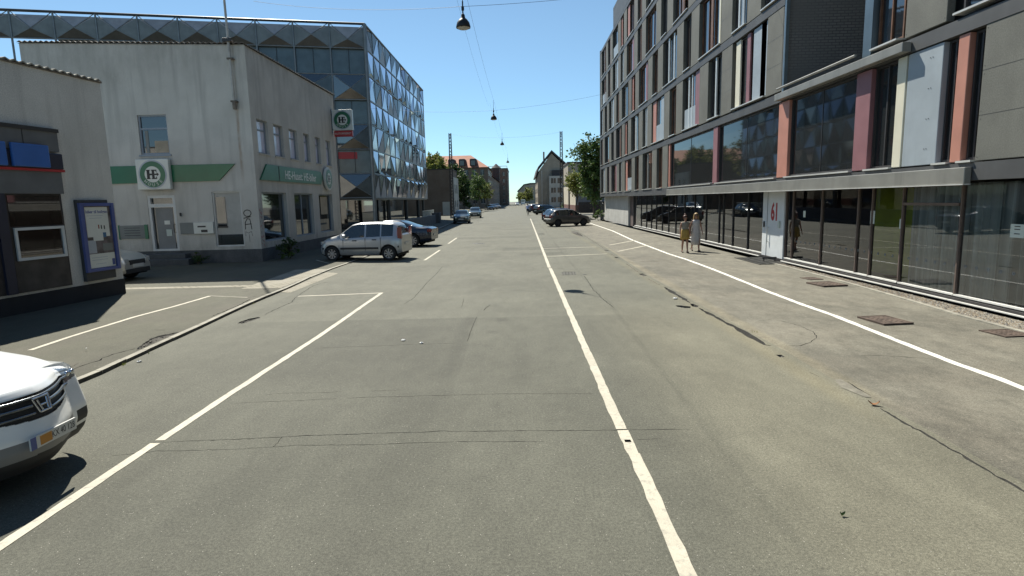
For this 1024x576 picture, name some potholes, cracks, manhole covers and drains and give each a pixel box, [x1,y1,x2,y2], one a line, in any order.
manhole cover [978,329,1024,338]
manhole cover [857,315,914,326]
